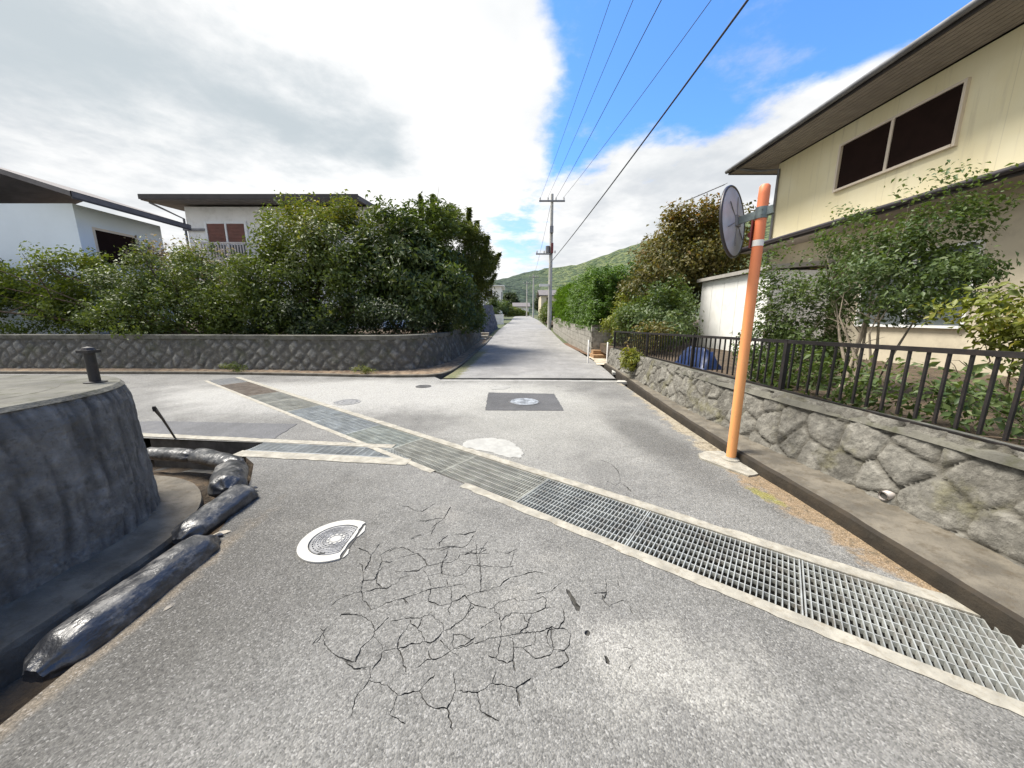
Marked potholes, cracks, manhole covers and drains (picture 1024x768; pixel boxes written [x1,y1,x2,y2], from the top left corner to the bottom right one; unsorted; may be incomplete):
drain grate [247,443,409,459]
drain grate [288,405,346,422]
drain grate [220,382,261,390]
drain grate [387,438,477,473]
drain grate [801,560,1024,702]
drain grate [345,425,423,451]
drain grate [626,511,804,615]
manhole cover [297,520,366,563]
drain grate [440,456,549,502]
drain grate [248,392,296,403]
drain grate [233,386,277,396]
drain grate [314,414,379,434]
